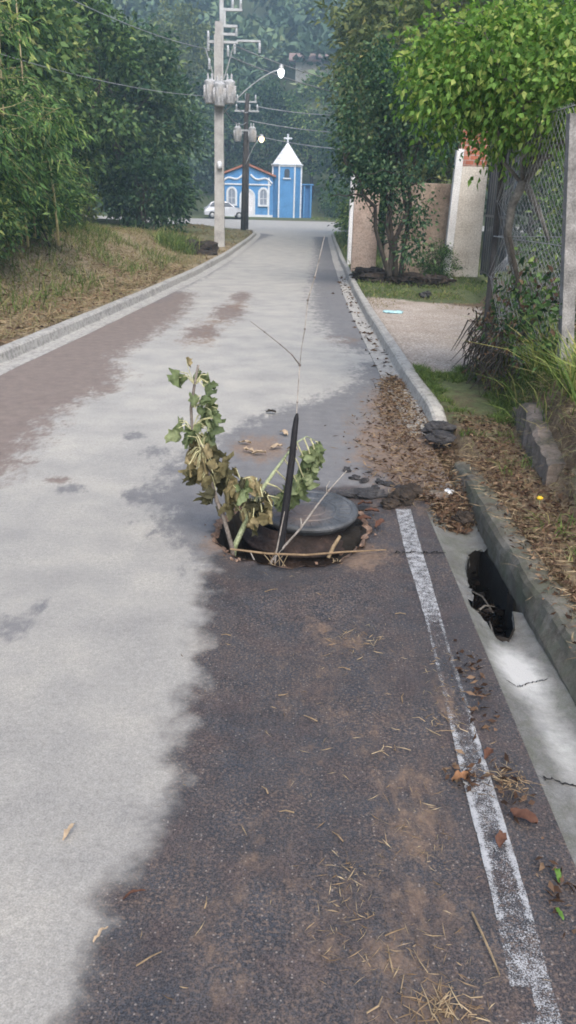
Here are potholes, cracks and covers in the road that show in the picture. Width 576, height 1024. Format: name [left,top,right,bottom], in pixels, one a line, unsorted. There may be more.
pothole [204,502,382,569]
manhole cover [263,490,358,536]
